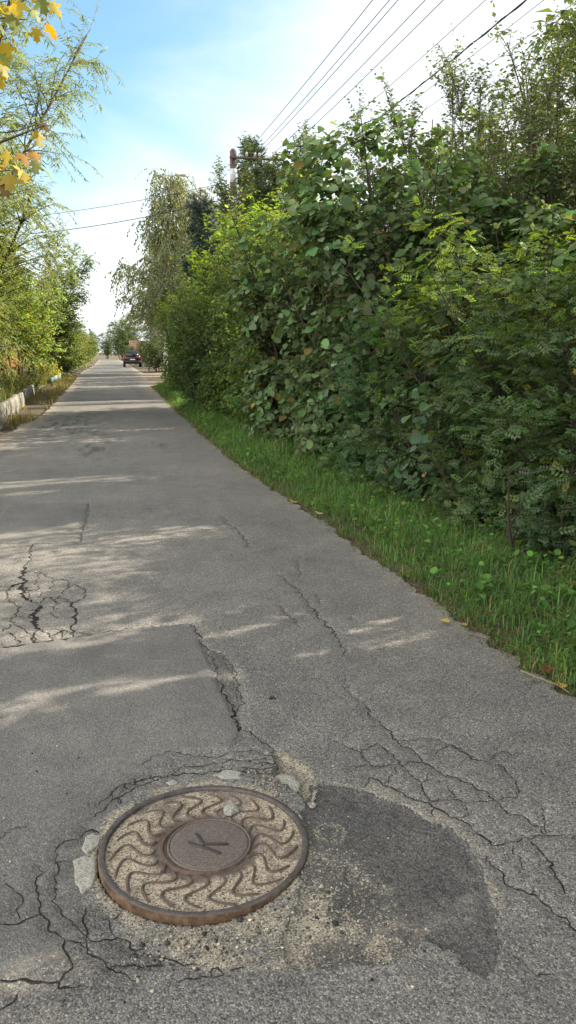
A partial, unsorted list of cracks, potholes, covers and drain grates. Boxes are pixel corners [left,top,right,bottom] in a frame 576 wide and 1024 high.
crack [281,565,346,656]
crack [335,679,576,931]
manhole cover [98,785,309,927]
crack [0,839,244,1010]
